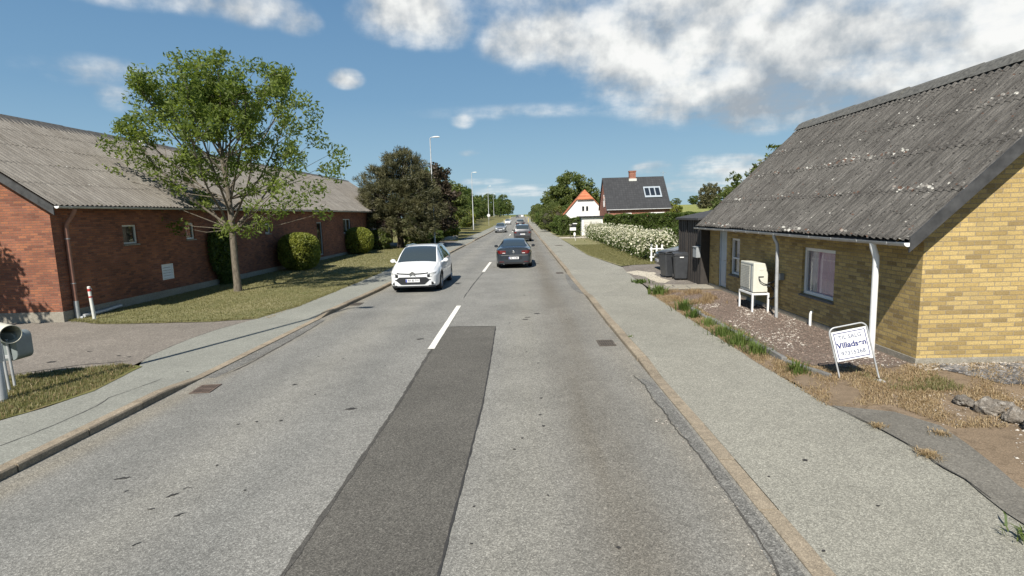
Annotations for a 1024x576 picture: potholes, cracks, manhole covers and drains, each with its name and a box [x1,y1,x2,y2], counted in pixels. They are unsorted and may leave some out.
drain grate [189,384,222,394]
